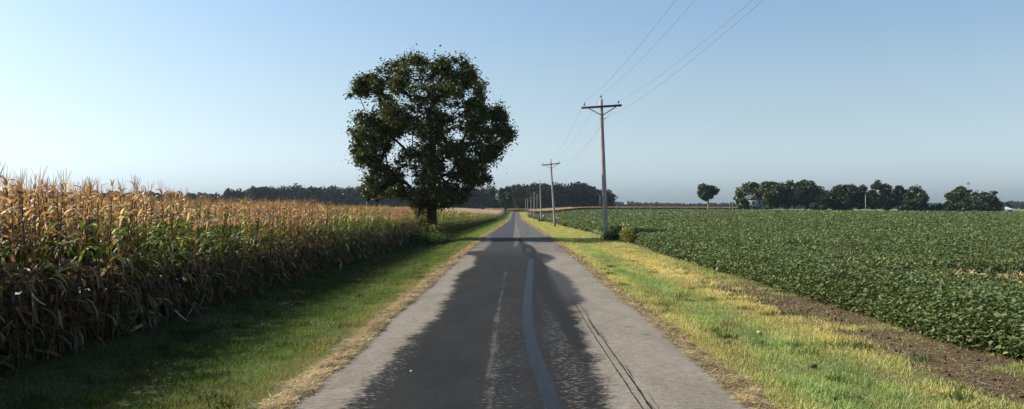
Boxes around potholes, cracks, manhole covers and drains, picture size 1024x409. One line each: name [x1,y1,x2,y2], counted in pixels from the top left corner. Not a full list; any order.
crack [572,298,659,409]
